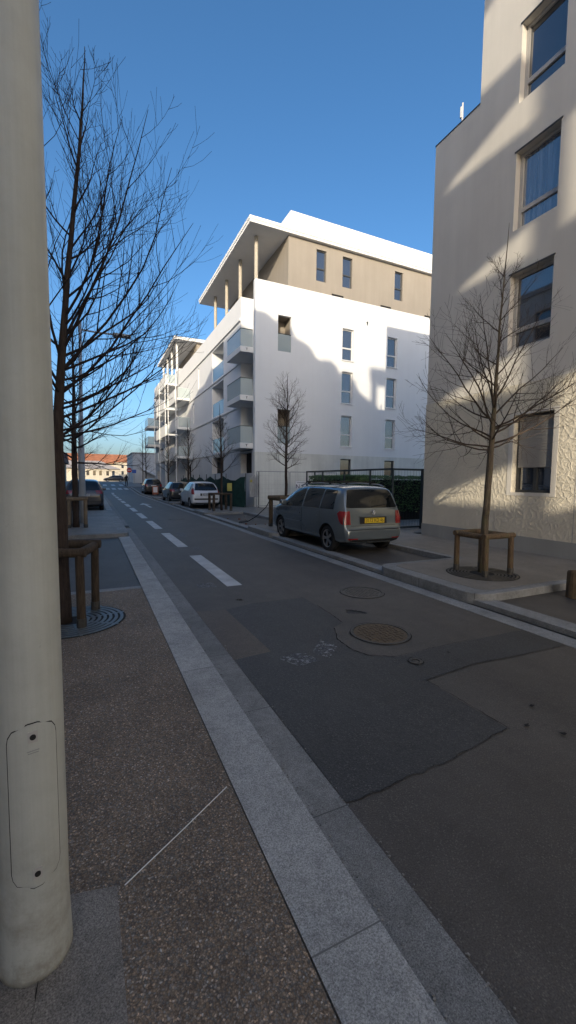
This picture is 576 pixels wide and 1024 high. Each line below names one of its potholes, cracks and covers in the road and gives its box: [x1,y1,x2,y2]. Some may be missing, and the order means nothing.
manhole cover [350,623,412,645]
manhole cover [340,587,385,599]
